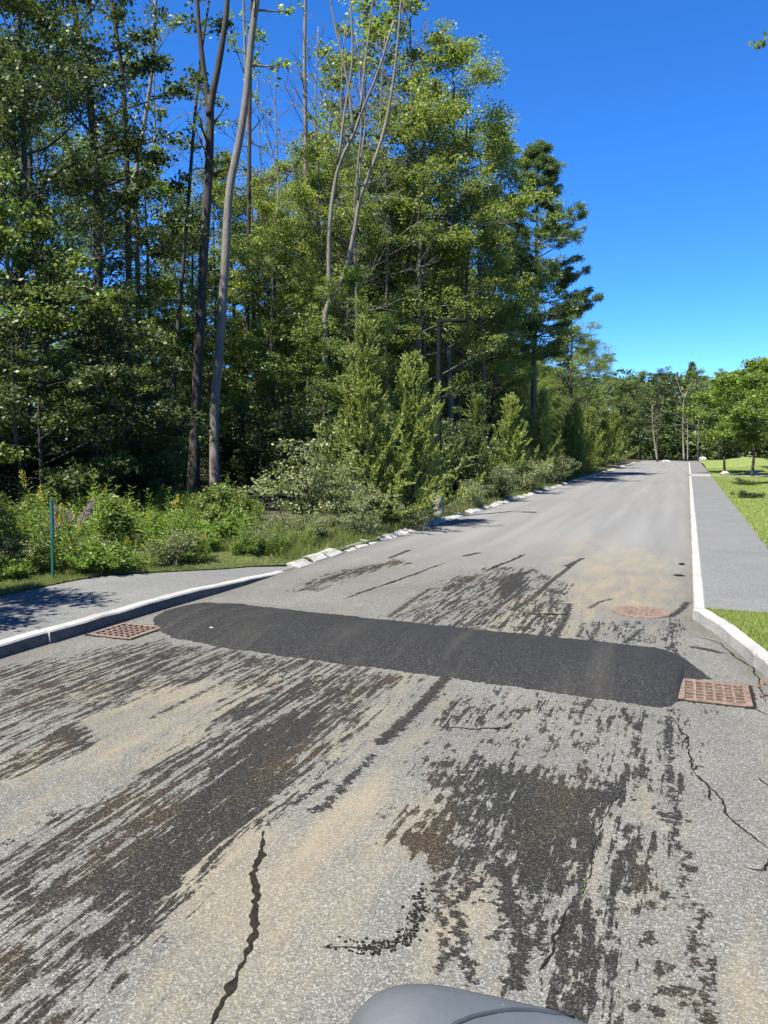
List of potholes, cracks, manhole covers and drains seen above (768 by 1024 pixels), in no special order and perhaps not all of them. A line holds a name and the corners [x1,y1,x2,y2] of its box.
drain grate [84,622,160,640]
crack [669,714,768,871]
crack [210,831,267,1024]
crack [539,788,623,971]
manhole cover [612,606,671,619]
drain grate [678,678,758,709]
